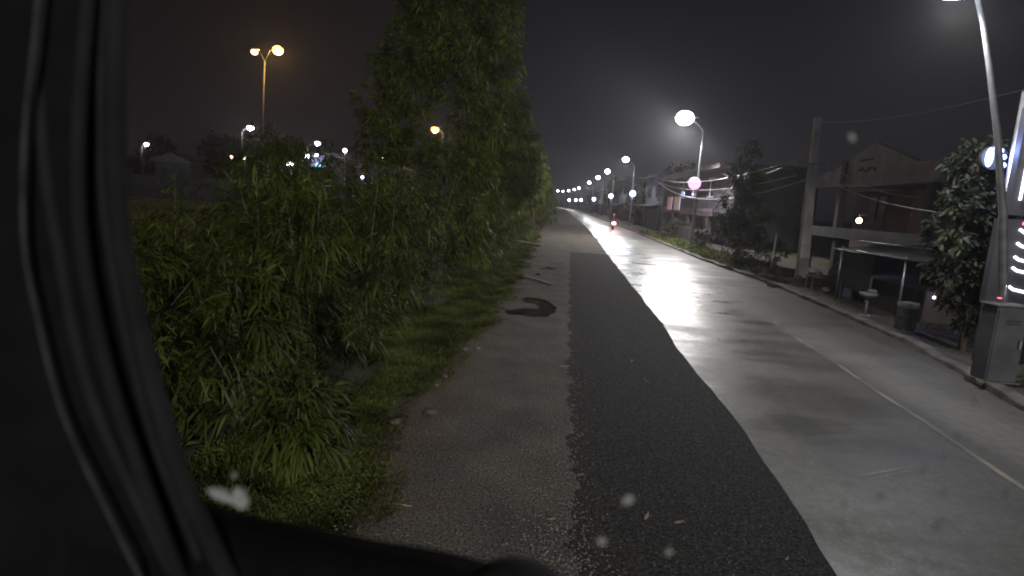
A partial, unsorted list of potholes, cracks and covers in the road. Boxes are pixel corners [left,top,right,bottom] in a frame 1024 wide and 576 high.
pothole [504,297,557,317]
